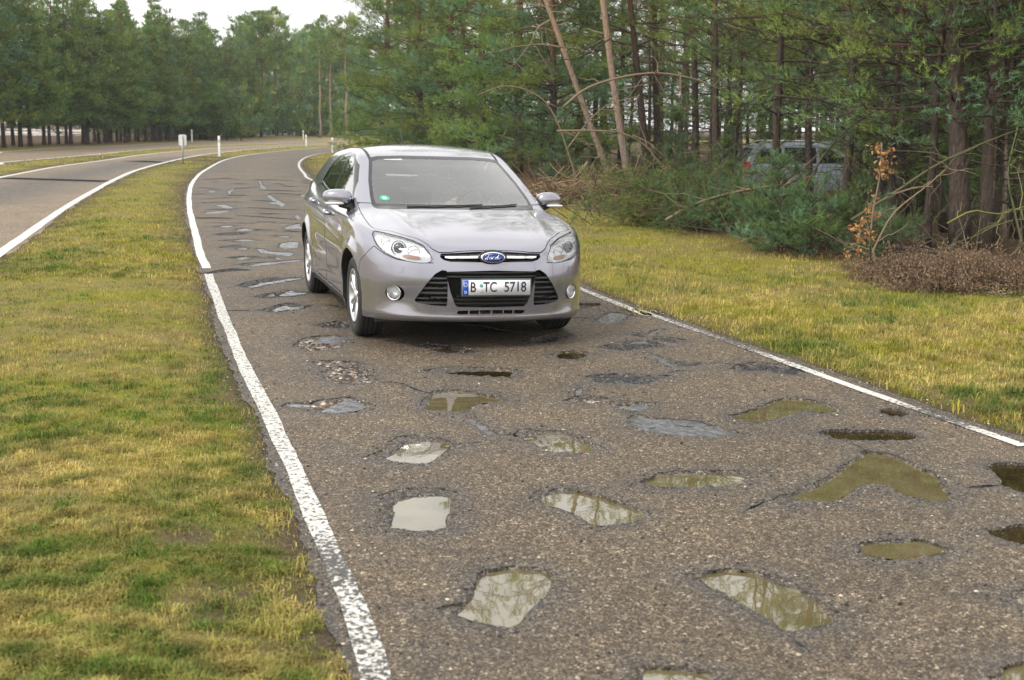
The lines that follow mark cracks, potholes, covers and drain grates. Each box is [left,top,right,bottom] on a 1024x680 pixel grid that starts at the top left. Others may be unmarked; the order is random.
pothole [436,565,555,630]
pothole [280,396,373,414]
pothole [363,435,454,465]
pothole [685,567,839,633]
pothole [549,351,590,360]
pothole [424,366,518,378]
pothole [513,429,605,455]
pothole [727,397,840,424]
pothole [311,360,381,384]
pothole [291,335,355,351]
pothole [983,462,1024,494]
pothole [767,450,957,505]
